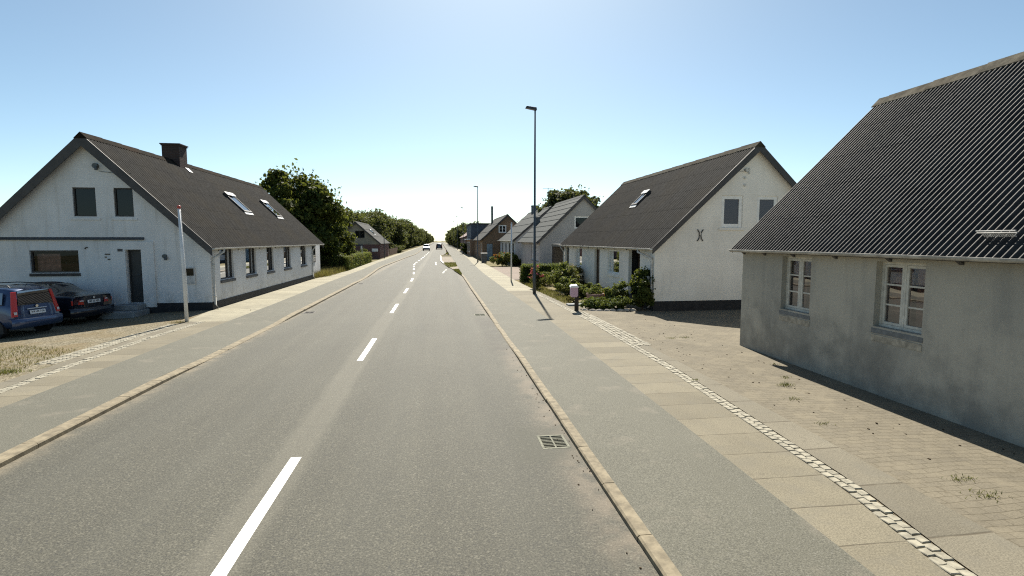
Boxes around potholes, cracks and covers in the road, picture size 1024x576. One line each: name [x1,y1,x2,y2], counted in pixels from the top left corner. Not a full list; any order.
drain grate [537,435,571,449]
